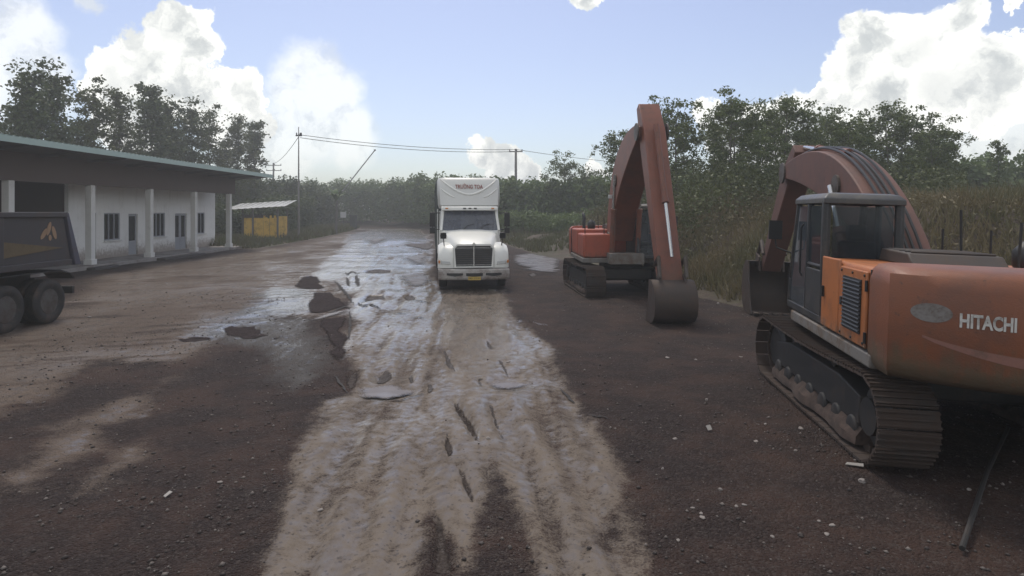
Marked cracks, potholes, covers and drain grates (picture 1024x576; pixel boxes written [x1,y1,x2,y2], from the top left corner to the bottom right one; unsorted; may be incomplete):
pothole [295,276,323,288]
pothole [224,326,266,339]
pothole [308,292,345,312]
pothole [320,317,348,360]
